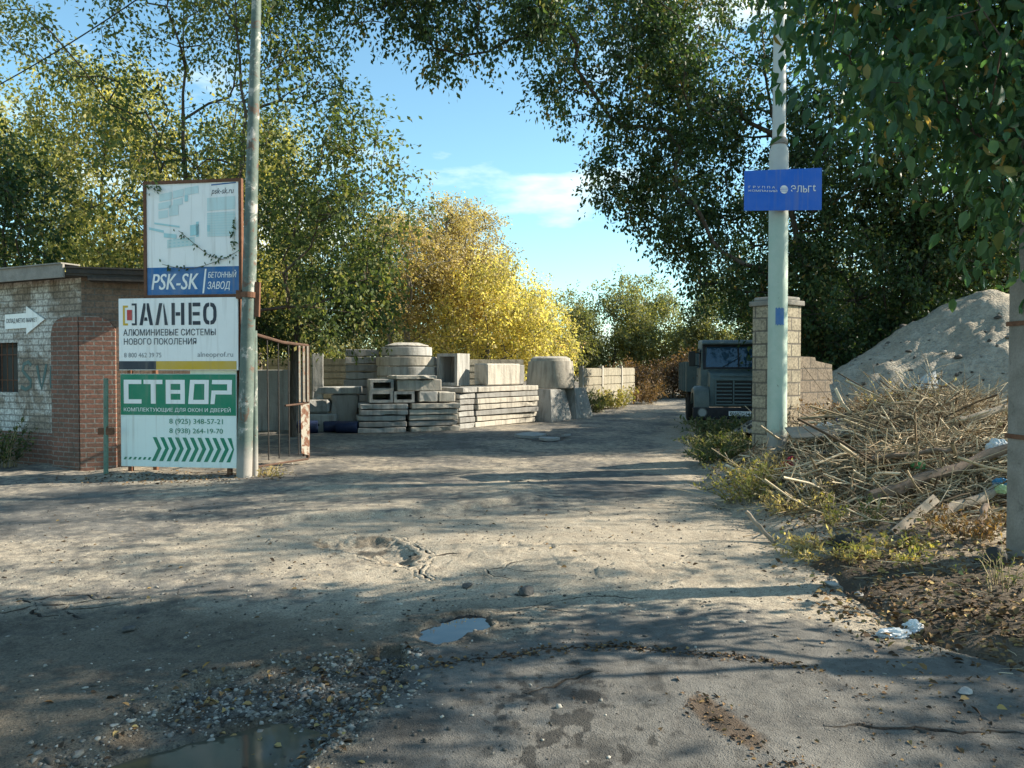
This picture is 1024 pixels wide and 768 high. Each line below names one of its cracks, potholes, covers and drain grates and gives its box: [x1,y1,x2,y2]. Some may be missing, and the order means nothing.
pothole [297,534,434,570]
crack [823,721,1024,740]
pothole [406,609,499,646]
crack [0,594,123,620]
crack [431,644,809,695]
